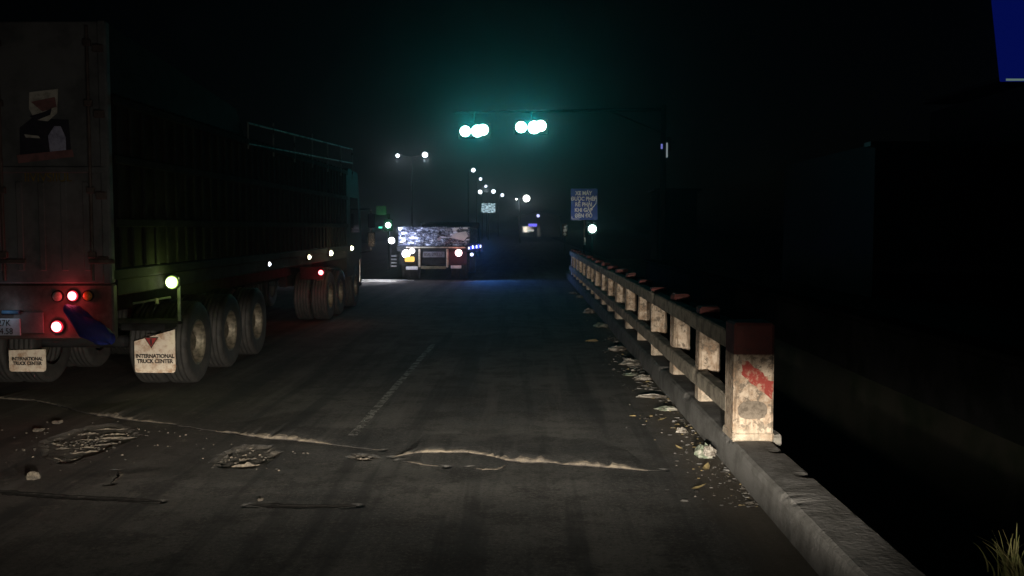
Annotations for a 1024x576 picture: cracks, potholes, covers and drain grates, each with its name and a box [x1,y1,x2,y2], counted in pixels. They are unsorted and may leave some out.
pothole [201,443,309,471]
pothole [338,452,393,463]
crack [0,388,665,503]
